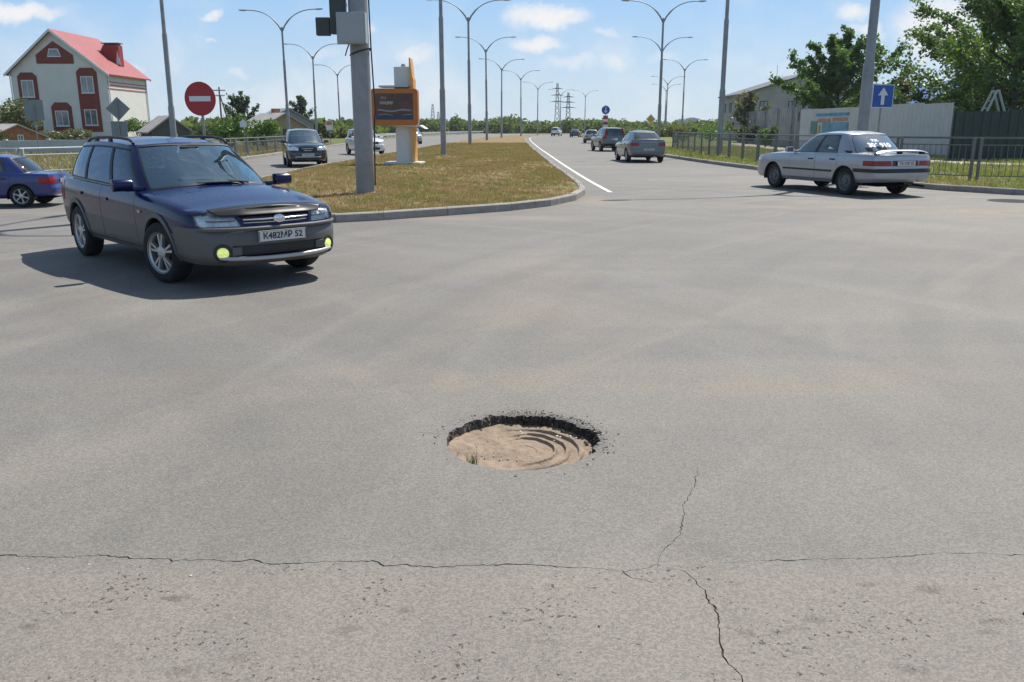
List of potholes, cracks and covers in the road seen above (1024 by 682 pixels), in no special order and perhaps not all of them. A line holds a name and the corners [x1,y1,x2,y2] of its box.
pothole [423,409,624,477]
crack [0,461,743,682]
crack [728,552,1021,563]
